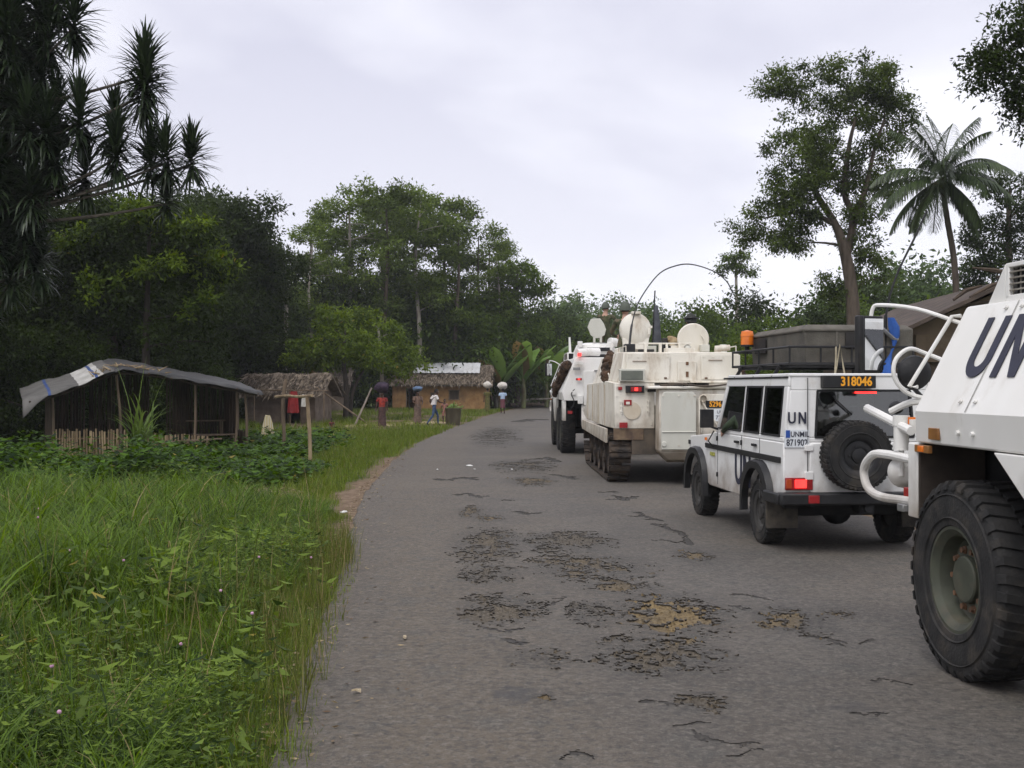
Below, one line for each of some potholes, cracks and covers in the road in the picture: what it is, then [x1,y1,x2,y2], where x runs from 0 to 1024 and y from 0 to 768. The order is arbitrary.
pothole [460,505,484,517]
pothole [579,633,739,679]
crack [870,677,913,686]
pothole [523,531,620,557]
pothole [752,606,834,639]
crack [559,749,595,760]
pothole [507,476,554,487]
pothole [521,554,664,585]
crack [638,699,765,757]
pothole [456,592,552,628]
pothole [467,427,523,448]
pothole [454,564,524,585]
